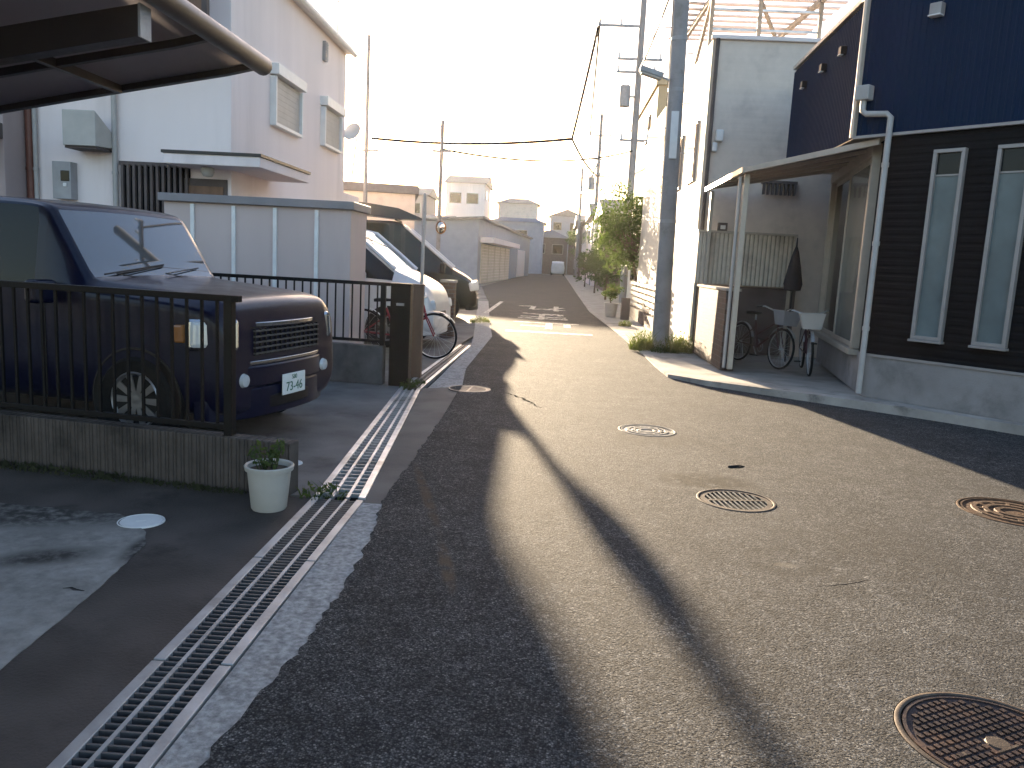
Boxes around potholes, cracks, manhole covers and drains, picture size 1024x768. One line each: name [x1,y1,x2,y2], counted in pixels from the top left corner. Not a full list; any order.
utility cover [117,514,166,529]
manhole cover [893,692,1024,768]
manhole cover [618,424,676,437]
manhole cover [956,497,1024,527]
manhole cover [696,489,776,512]
